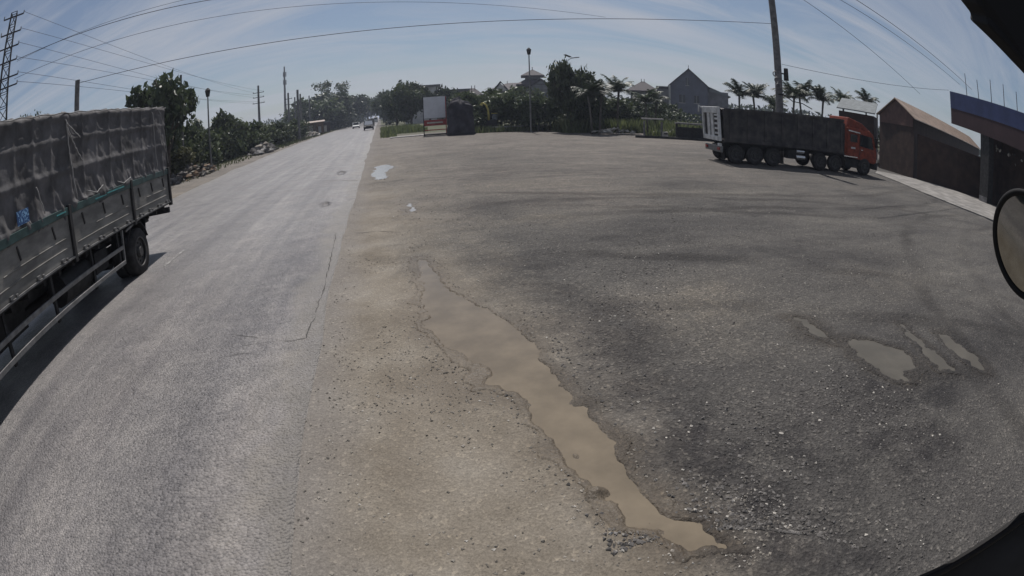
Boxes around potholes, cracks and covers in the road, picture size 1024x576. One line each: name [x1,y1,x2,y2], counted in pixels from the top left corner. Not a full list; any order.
pothole [929,328,995,377]
pothole [369,163,396,180]
pothole [834,334,928,385]
crack [219,235,336,358]
pothole [784,313,851,348]
pothole [407,255,750,563]
pothole [894,319,962,375]
pothole [400,201,419,213]
